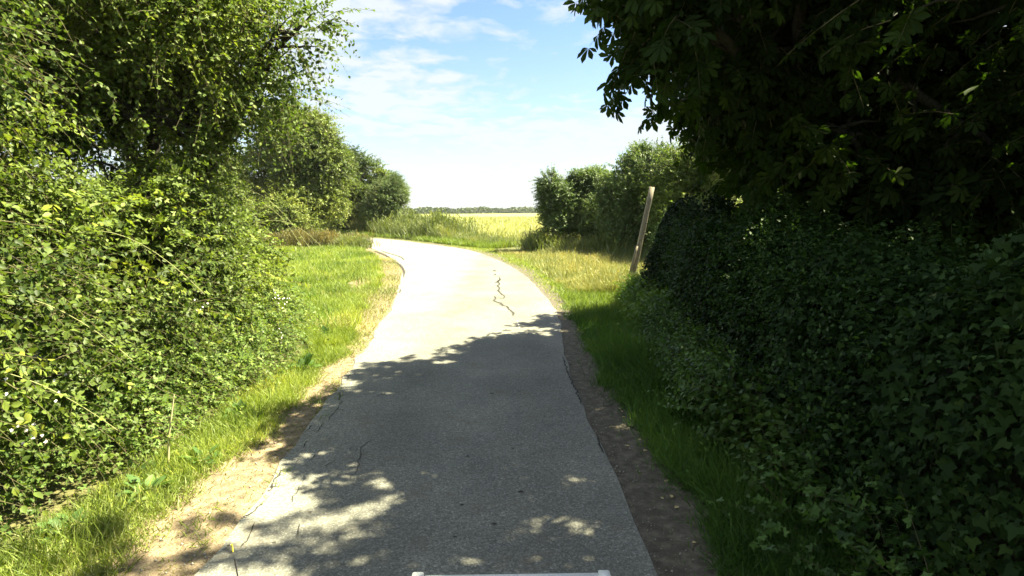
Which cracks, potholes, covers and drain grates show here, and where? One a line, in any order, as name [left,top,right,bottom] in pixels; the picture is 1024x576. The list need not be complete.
crack [241,375,368,546]
crack [493,270,515,316]
